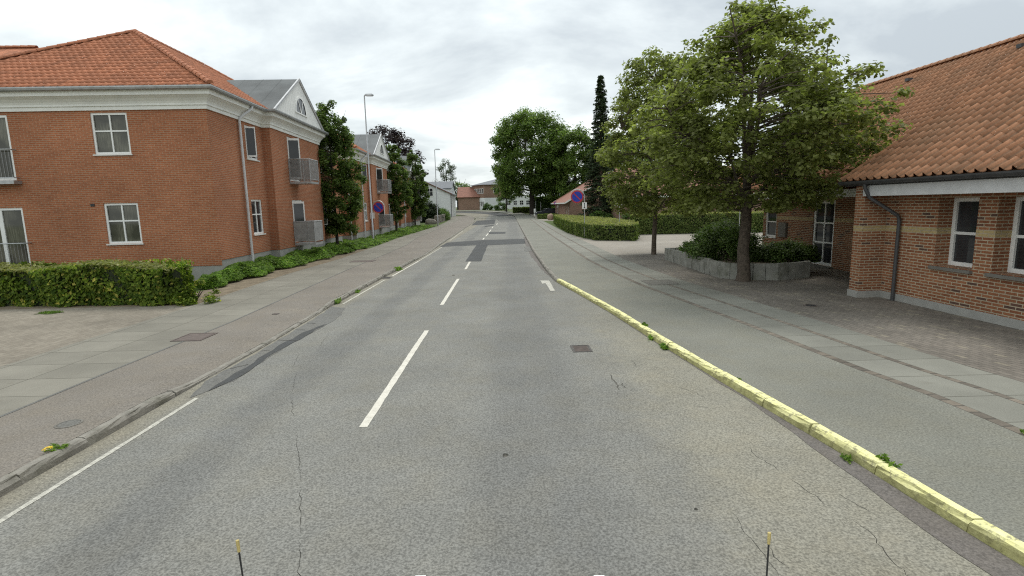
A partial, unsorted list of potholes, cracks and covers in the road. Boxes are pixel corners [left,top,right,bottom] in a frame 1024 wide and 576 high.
crack [280,347,321,576]
utility cover [54,419,84,429]
crack [750,448,906,575]
crack [733,513,785,575]
manhole cover [170,333,217,342]
